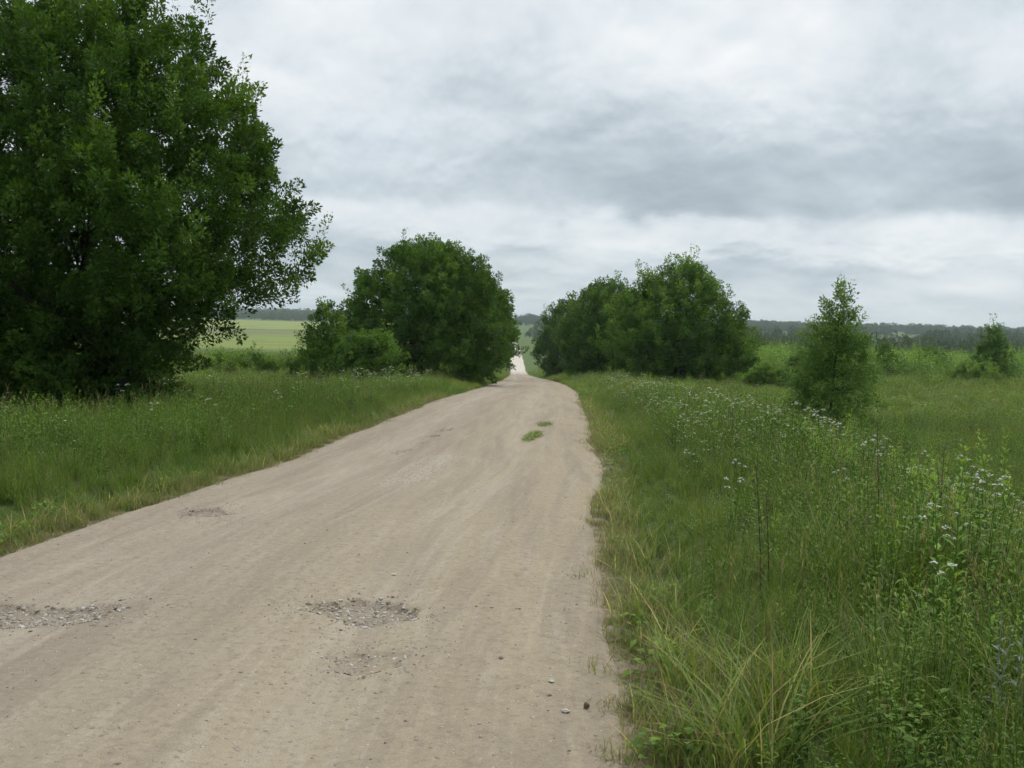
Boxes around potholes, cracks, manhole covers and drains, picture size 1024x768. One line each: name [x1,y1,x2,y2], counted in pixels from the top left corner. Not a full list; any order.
pothole [303,648,416,679]
pothole [0,596,174,632]
pothole [173,507,235,519]
pothole [275,589,448,632]
